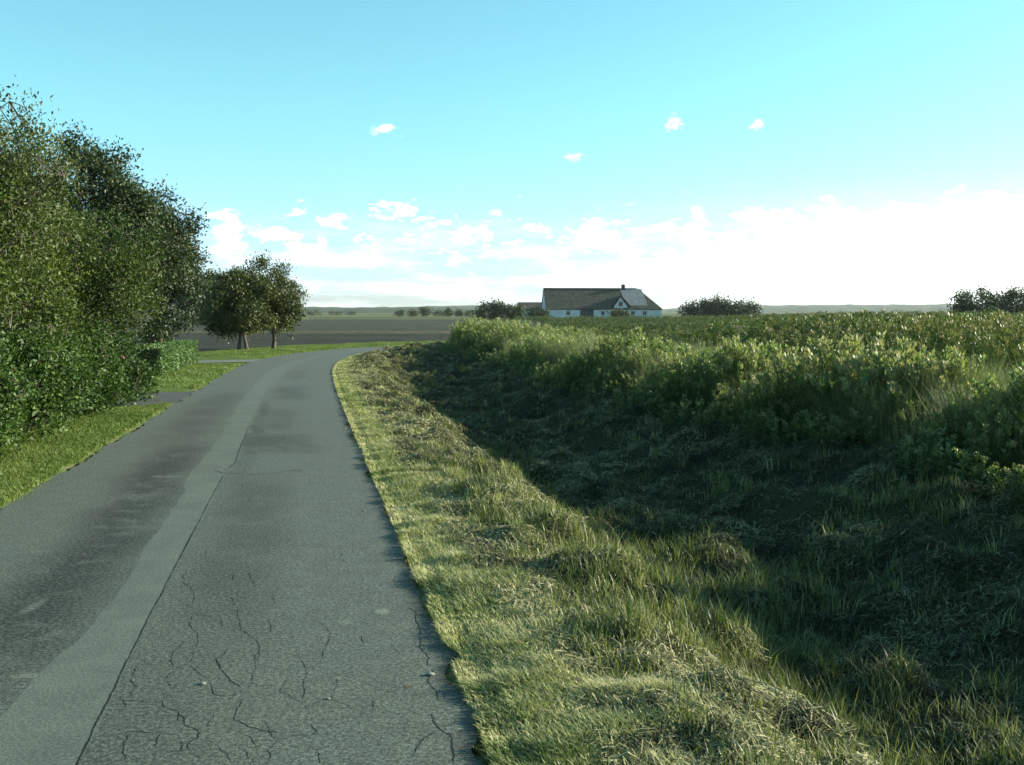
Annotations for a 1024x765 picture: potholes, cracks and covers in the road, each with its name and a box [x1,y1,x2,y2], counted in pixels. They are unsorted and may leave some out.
crack [76,429,346,765]
